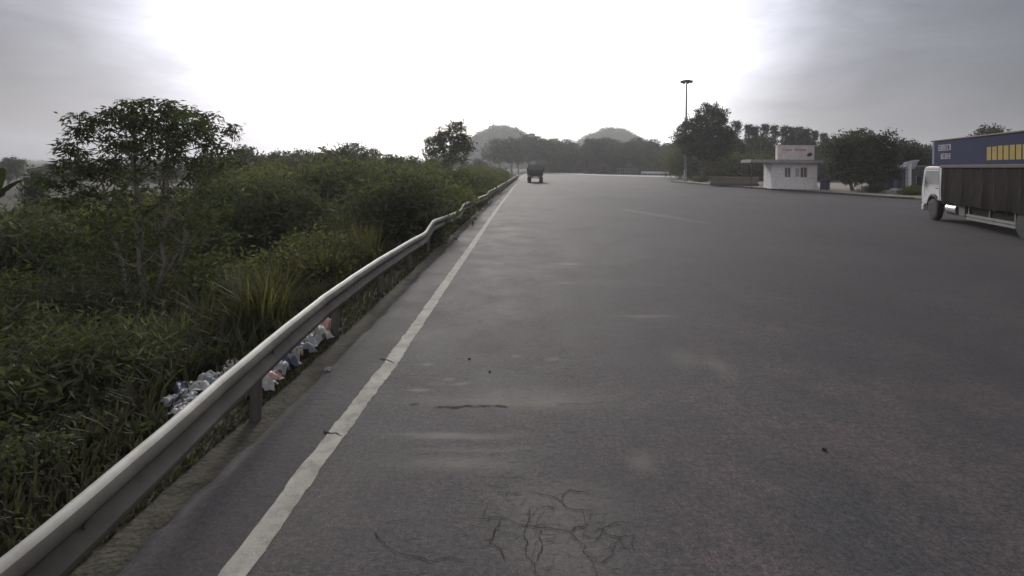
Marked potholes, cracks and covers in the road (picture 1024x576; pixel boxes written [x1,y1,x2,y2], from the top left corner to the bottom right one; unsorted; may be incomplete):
crack [373,518,465,561]
crack [468,489,643,576]
